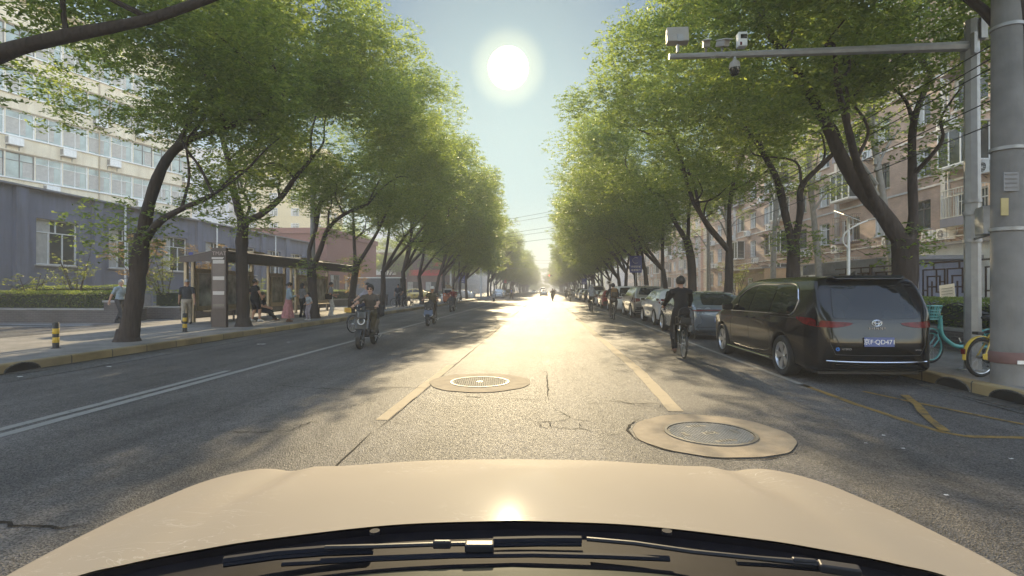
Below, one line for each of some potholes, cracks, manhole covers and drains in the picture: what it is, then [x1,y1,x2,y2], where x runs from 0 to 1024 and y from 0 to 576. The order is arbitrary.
crack [468,370,797,460]
manhole cover [429,374,530,392]
manhole cover [633,414,797,457]
crack [0,521,87,530]
